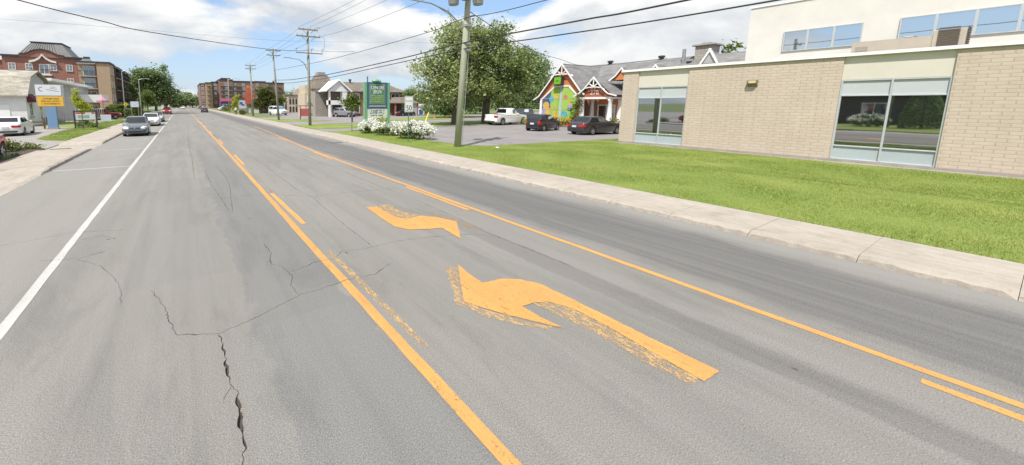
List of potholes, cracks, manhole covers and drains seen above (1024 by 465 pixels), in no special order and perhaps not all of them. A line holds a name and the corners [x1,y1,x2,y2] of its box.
crack [151,133,487,465]
crack [0,230,122,304]
